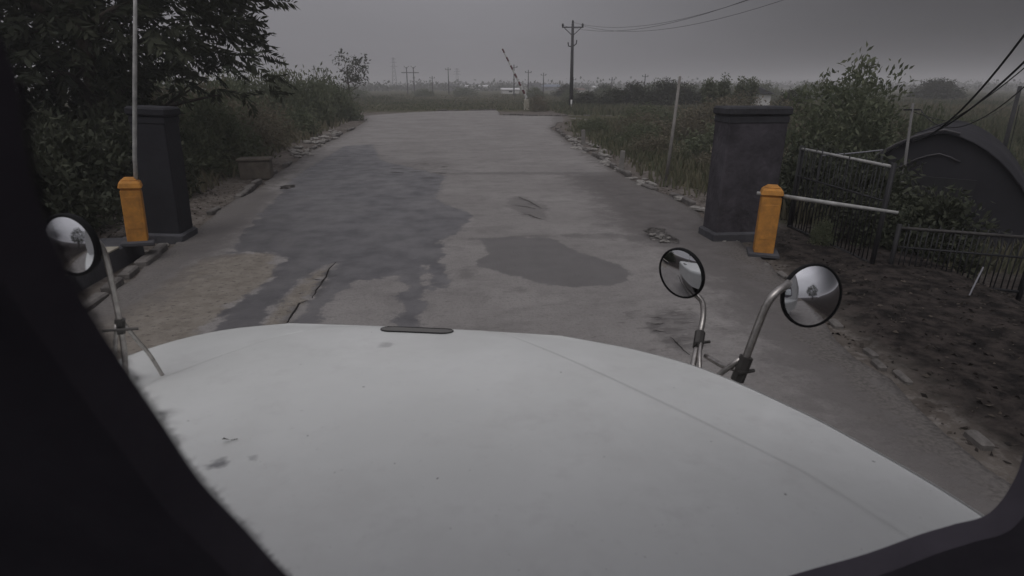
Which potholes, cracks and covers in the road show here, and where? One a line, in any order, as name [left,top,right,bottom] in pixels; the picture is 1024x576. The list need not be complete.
pothole [644,227,680,244]
crack [287,262,336,323]
